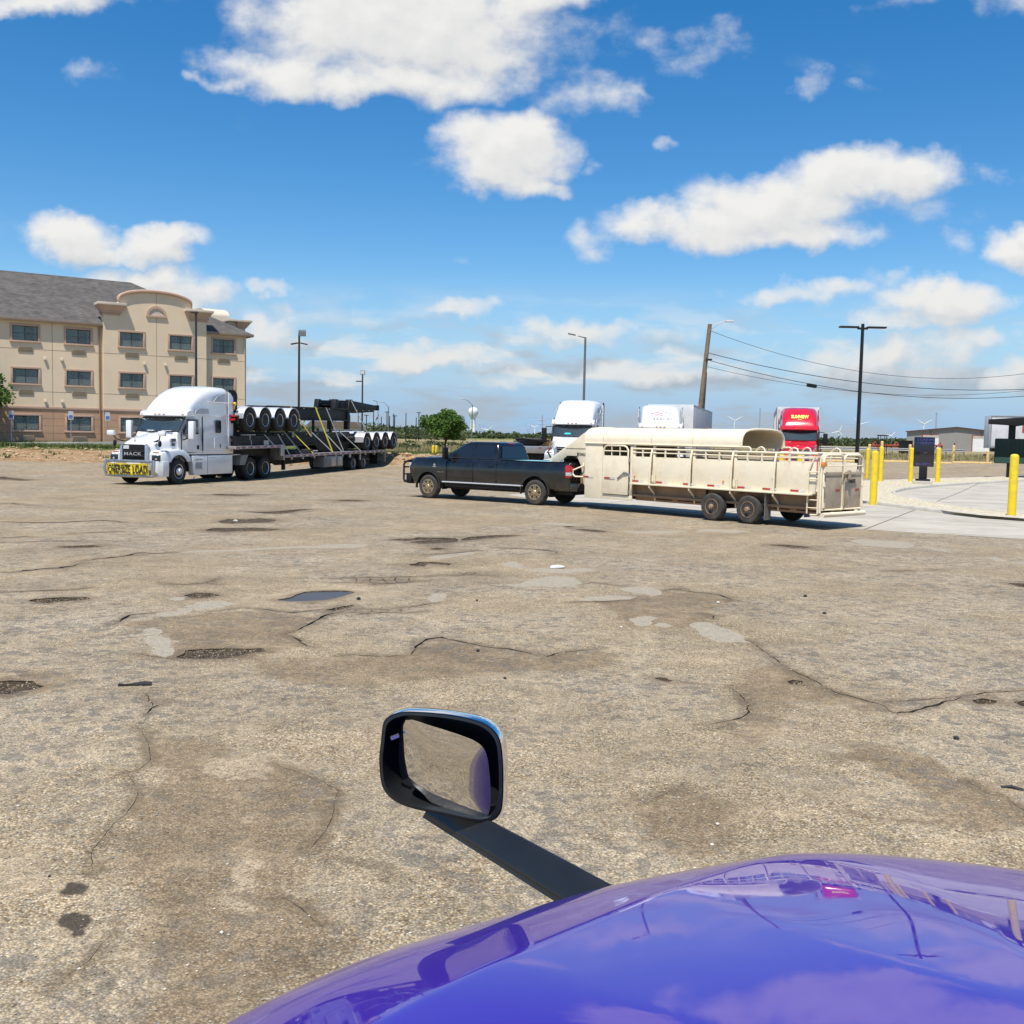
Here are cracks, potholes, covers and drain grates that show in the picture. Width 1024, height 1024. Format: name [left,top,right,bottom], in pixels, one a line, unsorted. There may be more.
crack [275,764,389,880]
crack [752,642,1024,714]
pothole [177,648,265,659]
crack [214,603,433,647]
crack [91,695,165,869]
pothole [0,680,44,694]
pothole [279,591,355,601]
